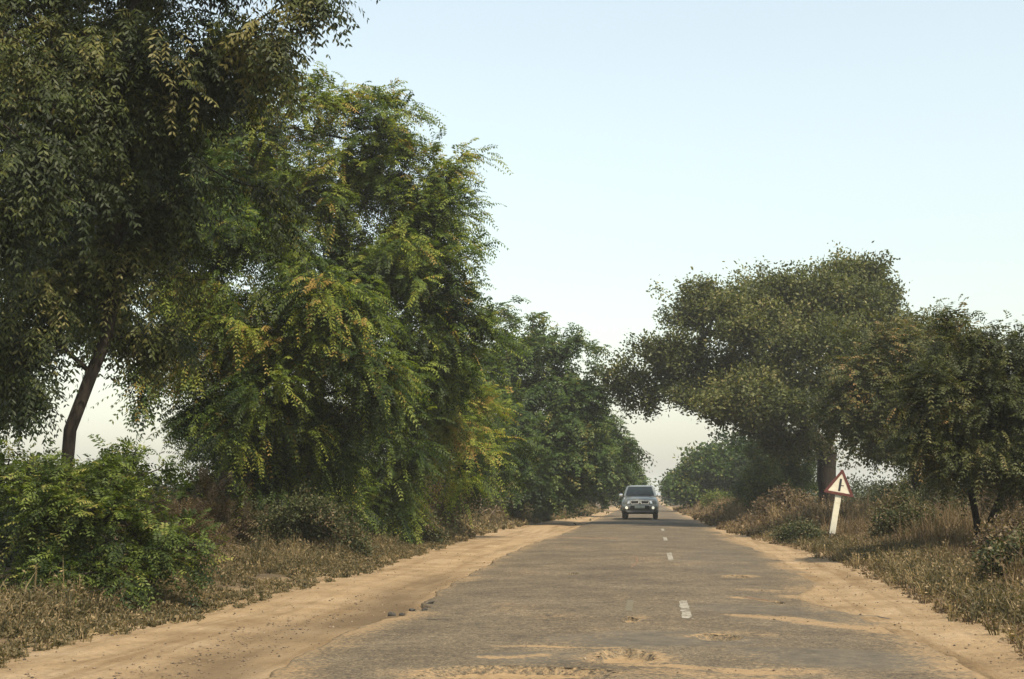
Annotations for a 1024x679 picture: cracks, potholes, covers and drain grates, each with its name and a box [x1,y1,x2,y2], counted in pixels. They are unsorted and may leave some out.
pothole [587,647,664,666]
pothole [620,616,640,624]
pothole [688,633,748,643]
